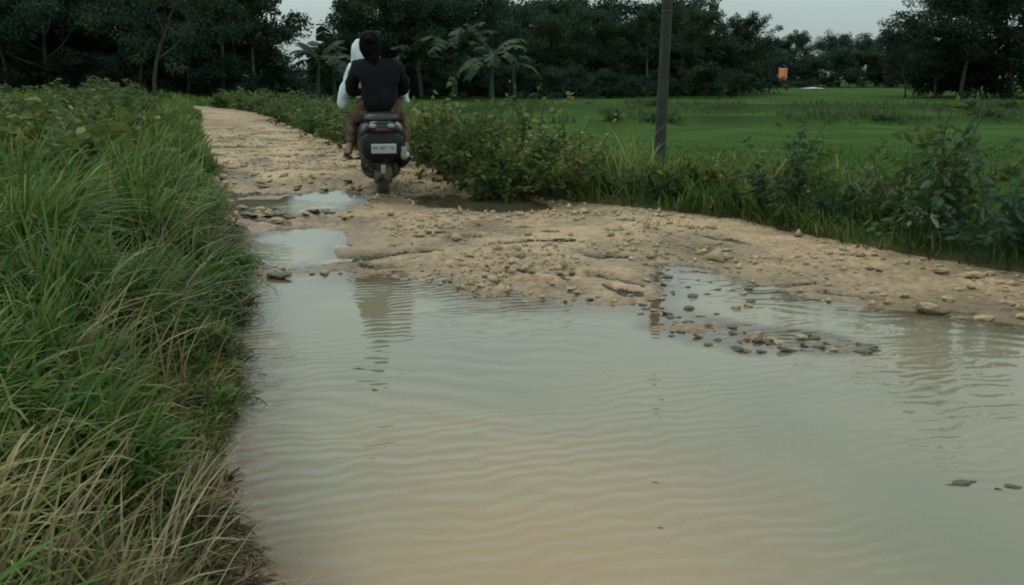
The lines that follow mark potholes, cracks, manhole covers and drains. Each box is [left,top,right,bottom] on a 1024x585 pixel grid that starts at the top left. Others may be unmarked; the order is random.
pothole [257,192,362,215]
pothole [422,196,478,209]
pothole [239,214,281,222]
pothole [469,202,528,213]
pothole [245,228,354,269]
pothole [237,201,290,216]
pothole [232,263,1024,585]
